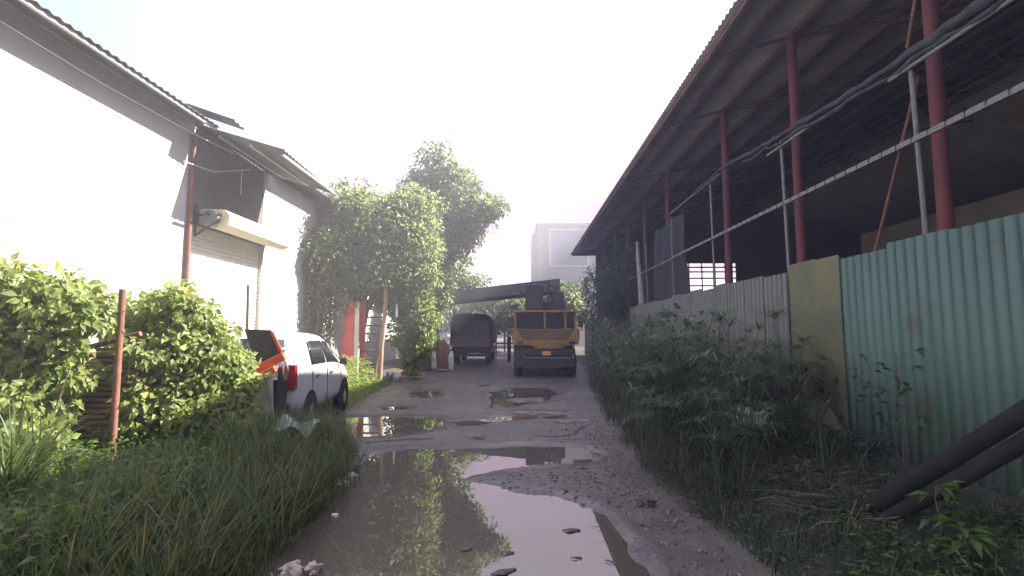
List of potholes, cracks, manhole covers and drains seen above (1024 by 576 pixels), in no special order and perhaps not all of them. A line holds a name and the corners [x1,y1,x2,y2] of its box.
pothole [479,386,567,409]
pothole [443,411,570,426]
pothole [320,413,459,438]
pothole [227,440,679,576]
pothole [409,389,445,398]
